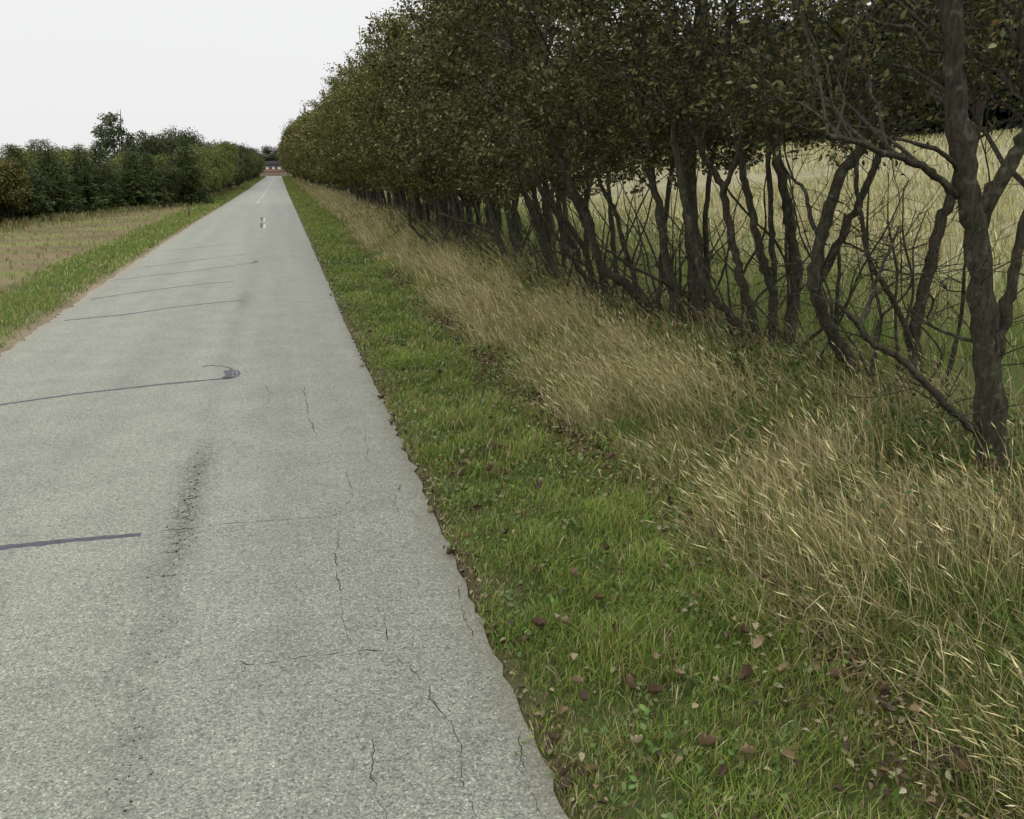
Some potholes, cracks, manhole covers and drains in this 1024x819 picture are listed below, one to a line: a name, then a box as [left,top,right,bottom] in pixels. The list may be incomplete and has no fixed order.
crack [163,470,354,531]
crack [518,731,542,818]
crack [201,534,477,819]
